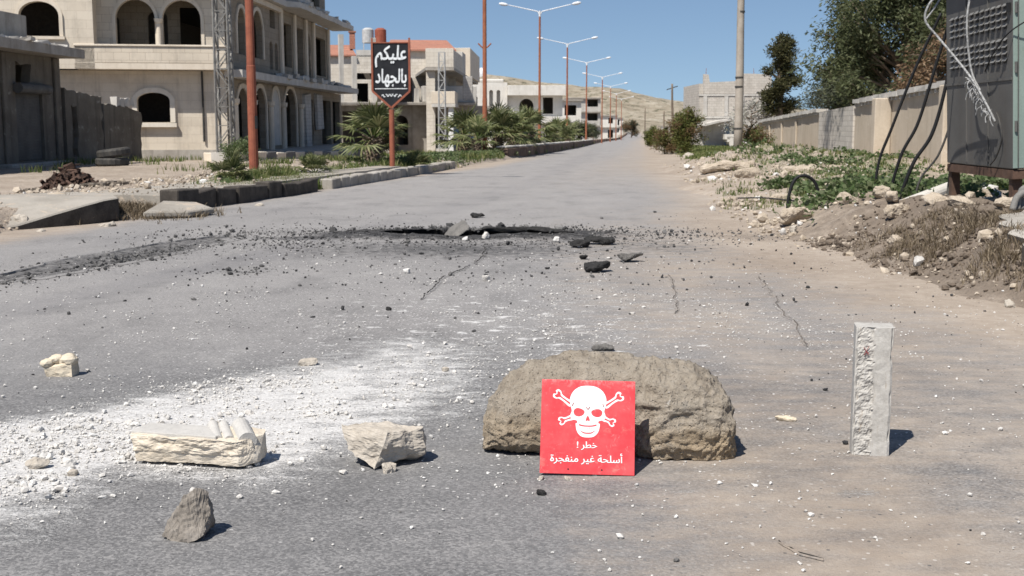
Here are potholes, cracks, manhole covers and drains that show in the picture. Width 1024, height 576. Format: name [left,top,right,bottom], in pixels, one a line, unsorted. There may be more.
pothole [356,228,590,239]
crack [757,276,808,347]
pothole [329,222,615,234]
crack [667,275,680,313]
crack [420,247,488,300]
